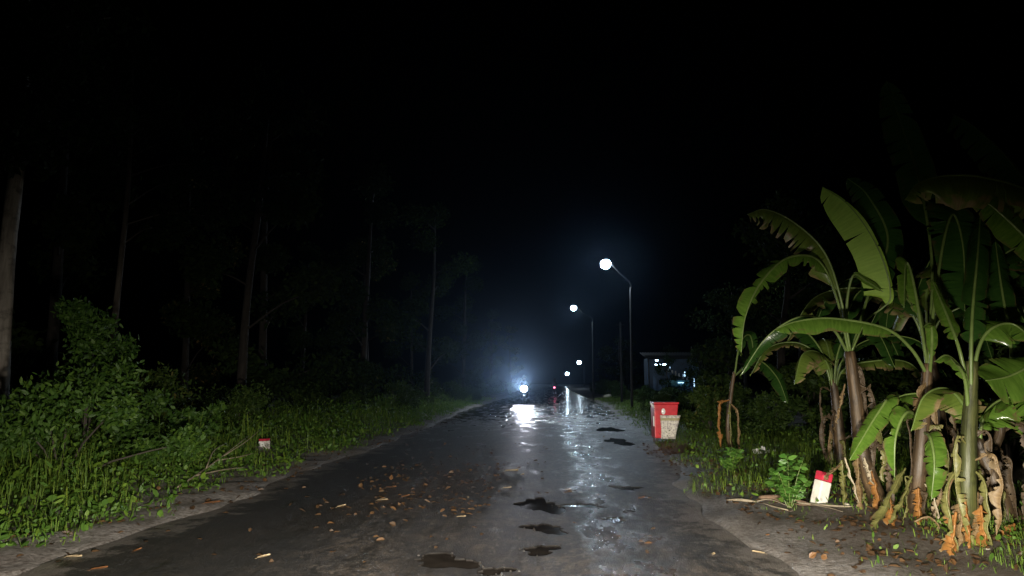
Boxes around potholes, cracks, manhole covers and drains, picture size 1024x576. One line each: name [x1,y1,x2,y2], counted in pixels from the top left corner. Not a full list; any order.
pothole [477,566,520,576]
pothole [518,523,569,535]
pothole [508,497,568,516]
pothole [519,544,561,557]
pothole [604,438,635,446]
pothole [414,552,484,569]
